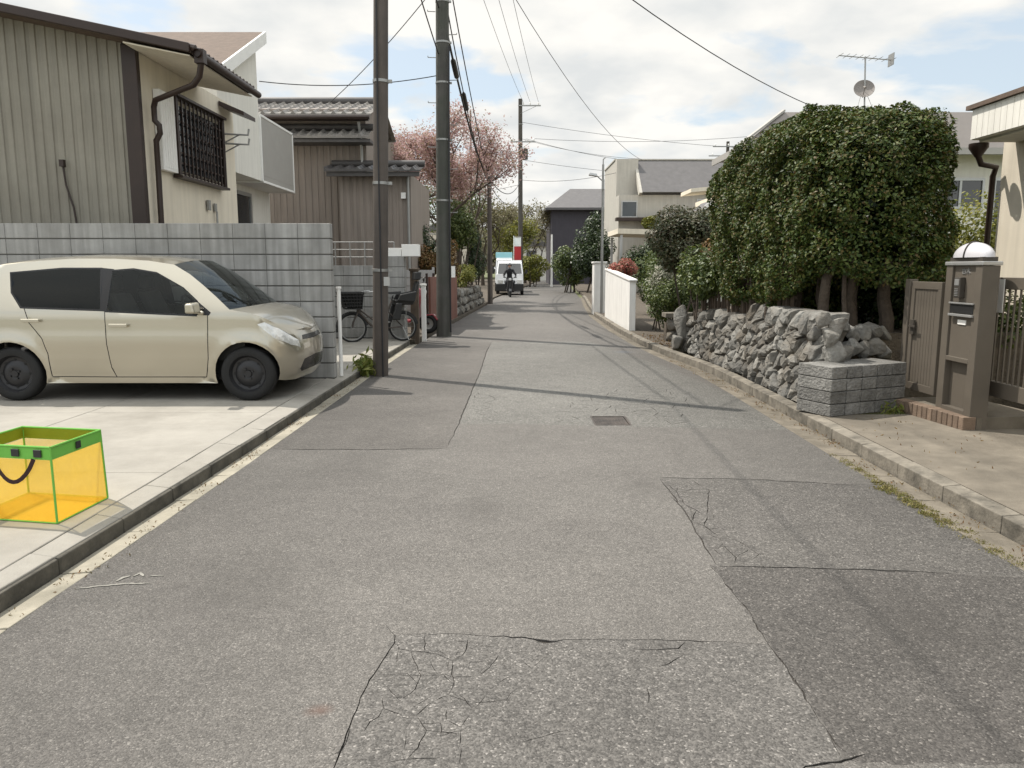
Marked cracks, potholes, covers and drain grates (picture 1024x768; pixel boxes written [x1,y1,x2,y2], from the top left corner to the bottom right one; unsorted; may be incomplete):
manhole cover [590,416,633,426]
crack [330,481,952,768]
